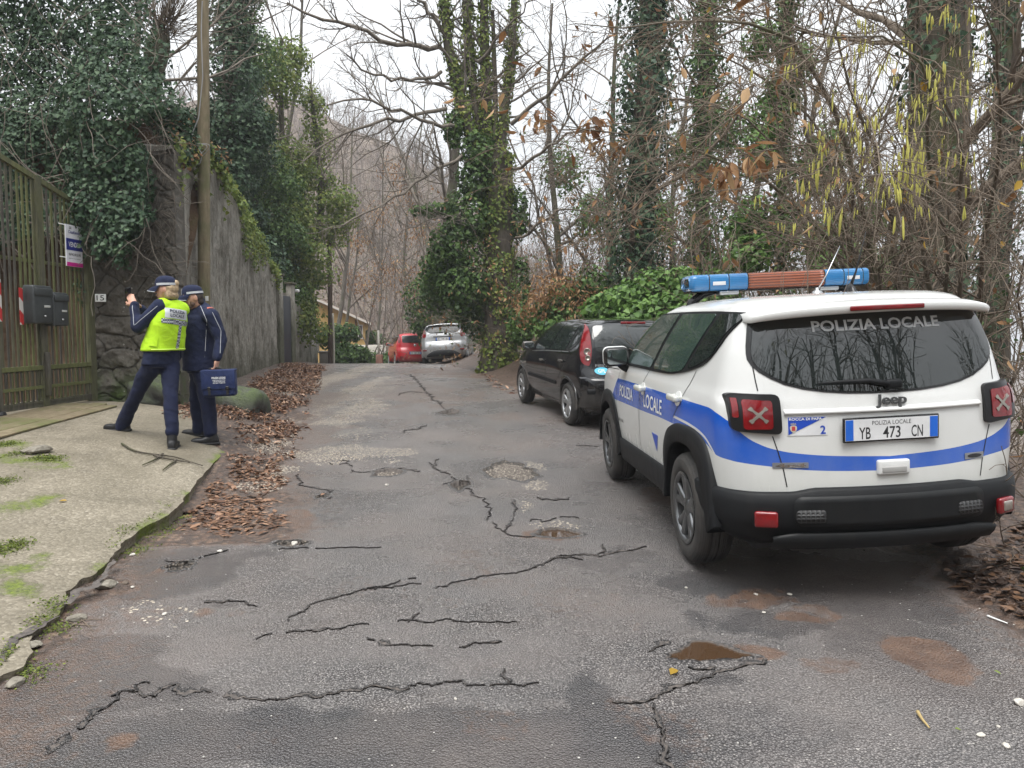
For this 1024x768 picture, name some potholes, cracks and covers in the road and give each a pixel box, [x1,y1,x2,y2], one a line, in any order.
crack [45,668,539,755]
pothole [478,459,544,483]
pothole [369,468,407,477]
crack [648,639,671,652]
pothole [530,527,588,539]
crack [255,459,647,648]
crack [399,374,447,433]
pothole [657,639,764,664]
pothole [160,559,198,573]
pothole [268,539,313,548]
